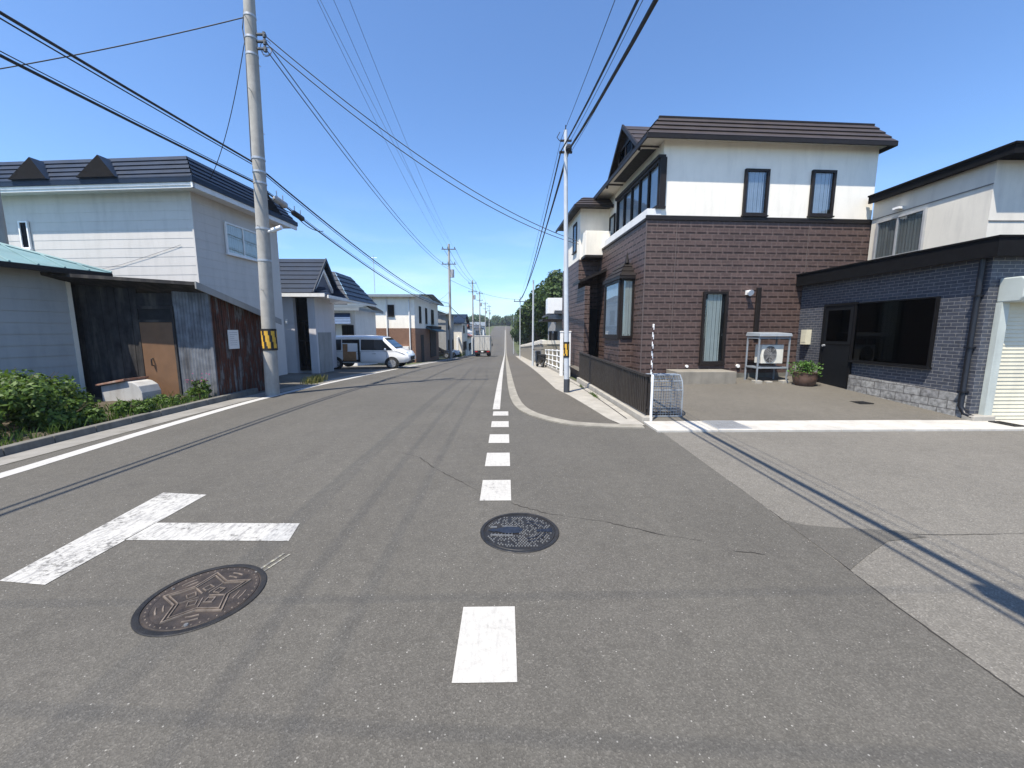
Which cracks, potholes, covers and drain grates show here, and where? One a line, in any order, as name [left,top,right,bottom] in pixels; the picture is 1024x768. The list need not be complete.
manhole cover [480,513,559,553]
crack [397,451,760,554]
manhole cover [130,564,267,637]
